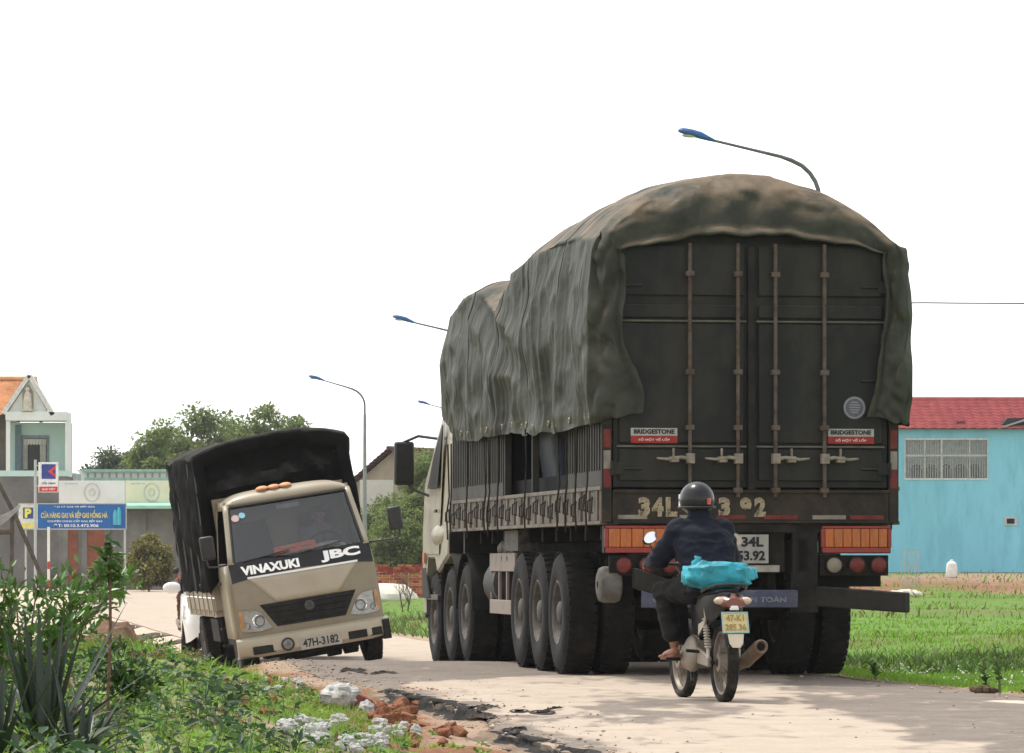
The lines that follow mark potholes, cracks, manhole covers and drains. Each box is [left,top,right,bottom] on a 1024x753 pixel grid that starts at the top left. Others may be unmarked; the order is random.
pothole [368,688,496,722]
pothole [465,731,601,753]
